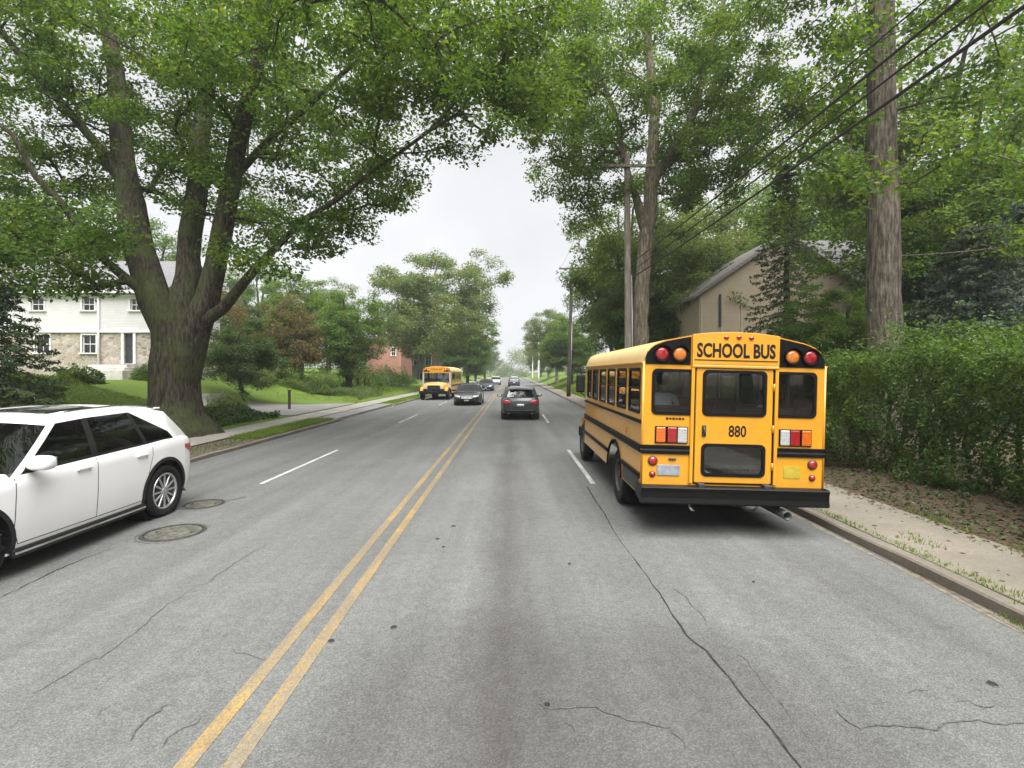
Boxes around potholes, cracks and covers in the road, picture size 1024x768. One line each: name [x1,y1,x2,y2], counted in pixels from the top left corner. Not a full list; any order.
manhole cover [177,499,230,510]
crack [97,703,201,748]
manhole cover [133,523,212,544]
crack [42,545,265,689]
crack [539,703,686,746]
crack [3,535,138,596]
crack [836,700,1022,731]
